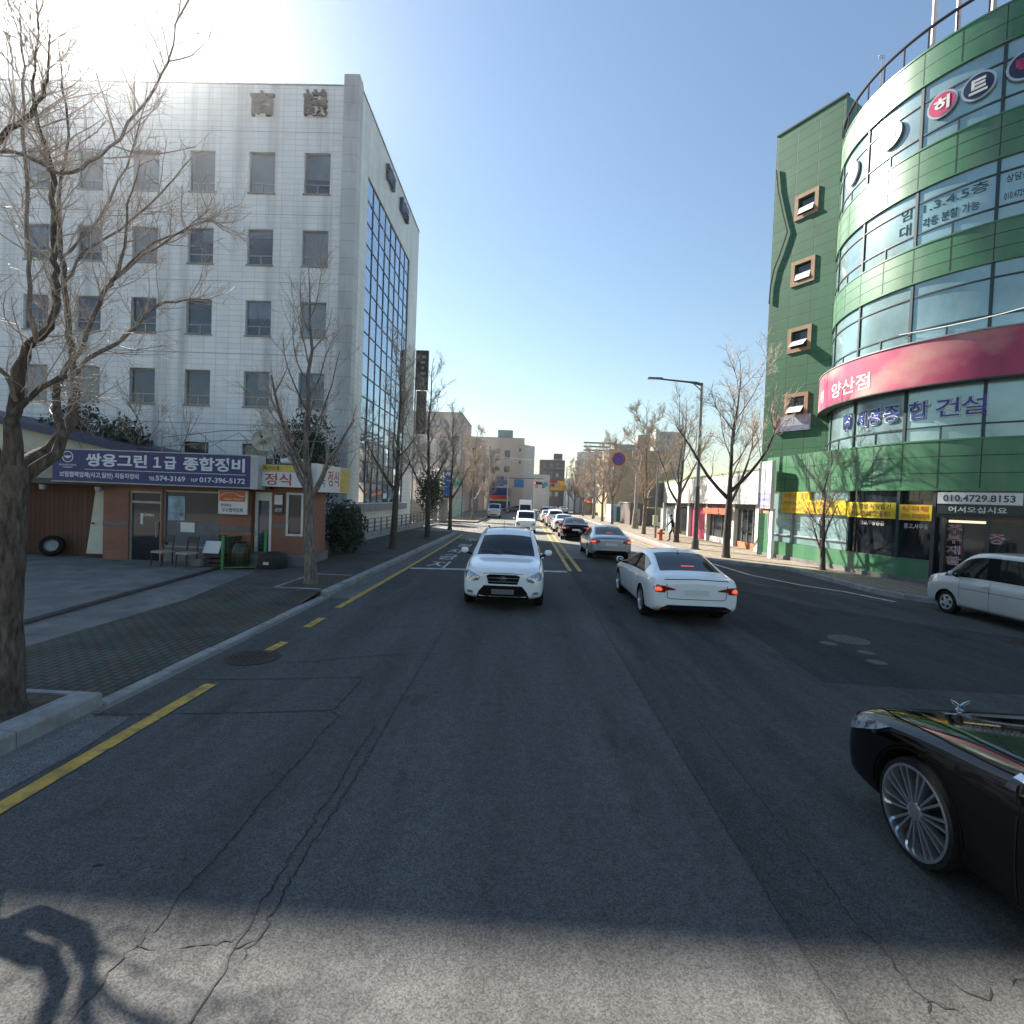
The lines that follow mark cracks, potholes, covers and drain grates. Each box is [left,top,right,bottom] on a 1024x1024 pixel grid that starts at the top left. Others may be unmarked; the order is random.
crack [65,631,442,1024]
crack [944,977,993,1001]
manhole cover [225,650,281,666]
